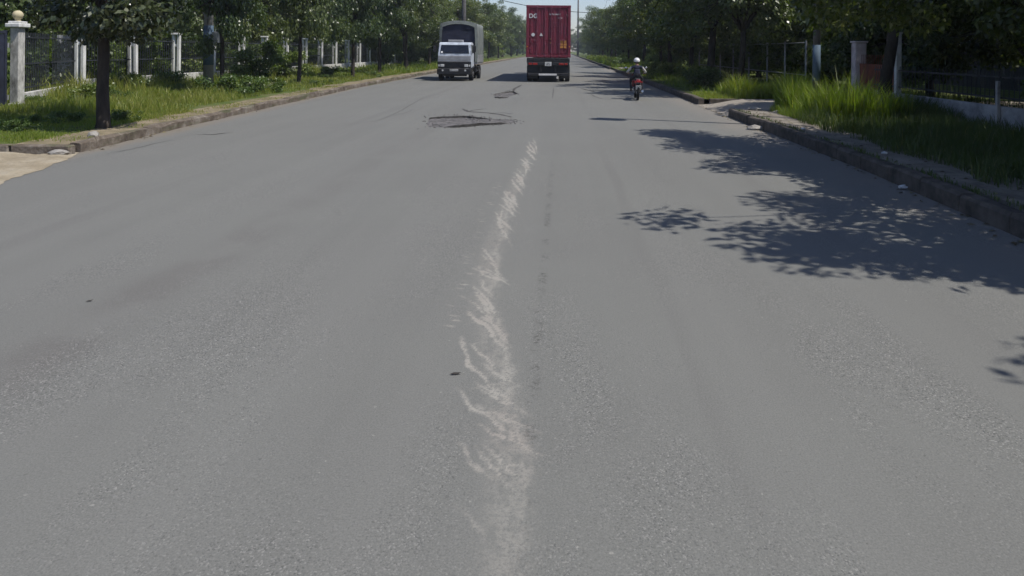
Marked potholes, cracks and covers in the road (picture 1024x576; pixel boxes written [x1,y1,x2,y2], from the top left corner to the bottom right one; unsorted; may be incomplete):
pothole [427,116,516,128]
